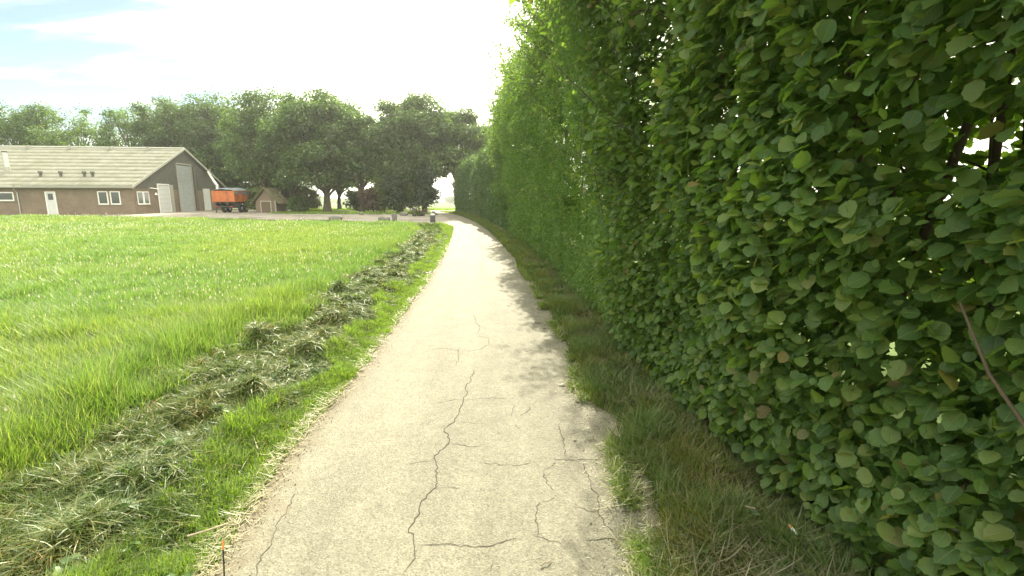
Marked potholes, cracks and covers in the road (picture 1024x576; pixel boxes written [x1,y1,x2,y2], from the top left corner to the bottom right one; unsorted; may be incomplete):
crack [256,494,295,575]
crack [404,370,654,572]
